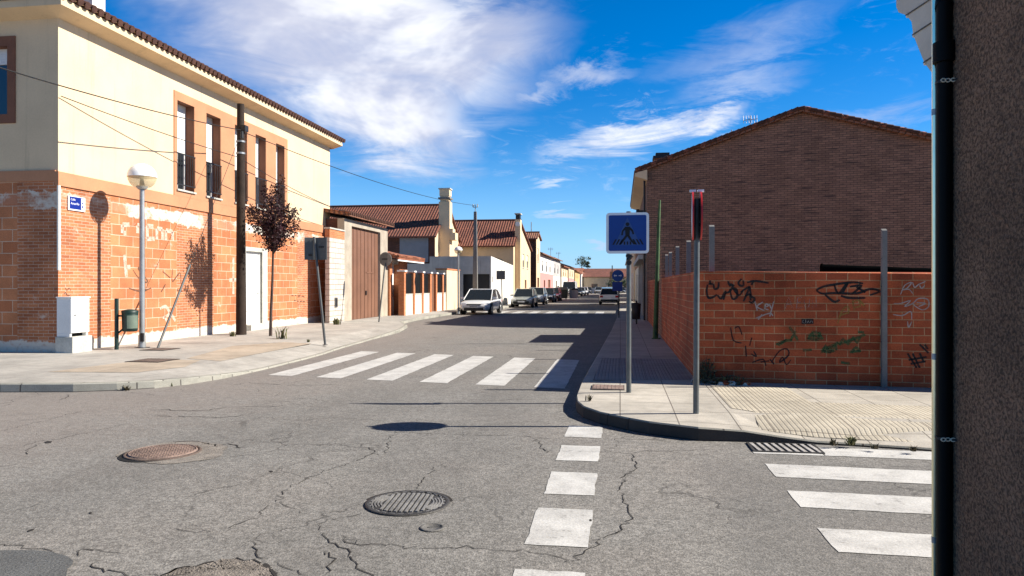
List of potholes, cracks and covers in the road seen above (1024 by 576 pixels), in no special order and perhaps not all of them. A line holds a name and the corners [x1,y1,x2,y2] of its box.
crack [229,431,565,575]
manhole cover [118,444,202,462]
utility cover [420,523,445,532]
pothole [160,557,277,576]
crack [77,548,179,576]
drain grate [746,442,825,454]
manhole cover [364,490,453,516]
crack [570,449,723,561]
